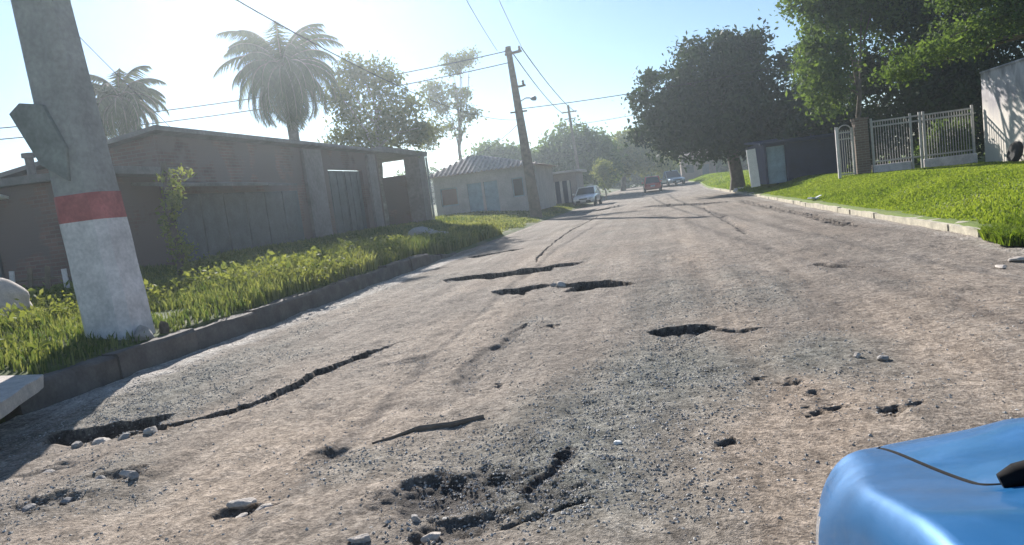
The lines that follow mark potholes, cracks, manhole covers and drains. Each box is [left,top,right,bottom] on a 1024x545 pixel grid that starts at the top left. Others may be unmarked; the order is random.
pothole [497,462,558,490]
pothole [796,406,840,421]
pothole [443,261,585,284]
pothole [646,324,719,340]
pothole [799,387,829,397]
pothole [338,459,544,529]
pothole [871,401,925,417]
pothole [710,433,745,451]
pothole [508,445,580,498]
